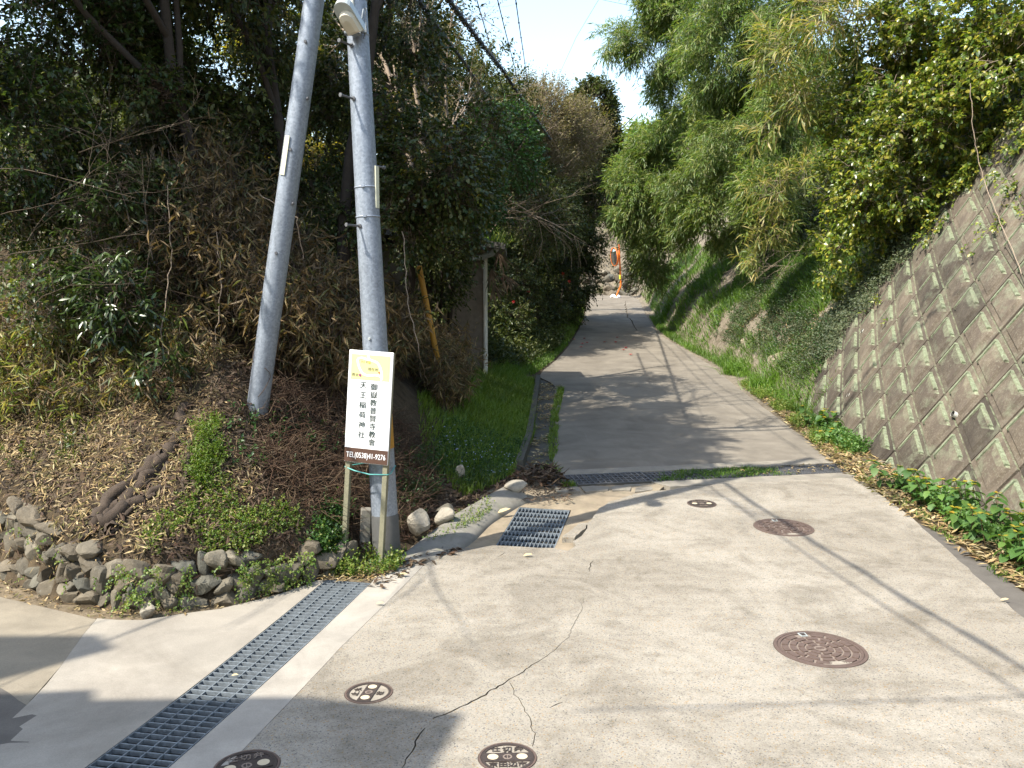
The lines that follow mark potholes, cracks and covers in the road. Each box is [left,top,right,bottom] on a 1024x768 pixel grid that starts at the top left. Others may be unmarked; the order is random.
manhole cover [753,518,814,536]
utility cover [687,499,717,508]
crack [402,598,584,768]
drain grate [86,689,251,768]
drain grate [191,627,321,695]
utility cover [345,682,393,704]
utility cover [213,749,280,768]
drain grate [496,507,570,548]
